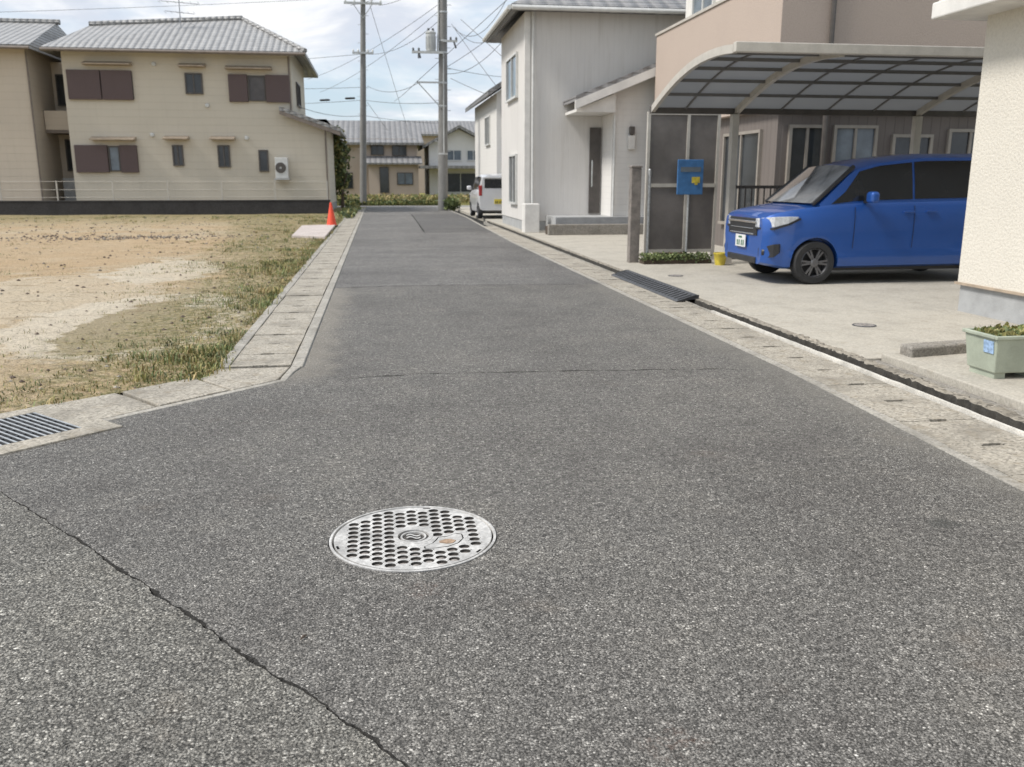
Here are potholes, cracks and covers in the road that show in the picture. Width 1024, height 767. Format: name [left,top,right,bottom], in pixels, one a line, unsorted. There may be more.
crack [1,492,410,767]
manhole cover [328,506,497,573]
drain grate [0,404,123,456]
